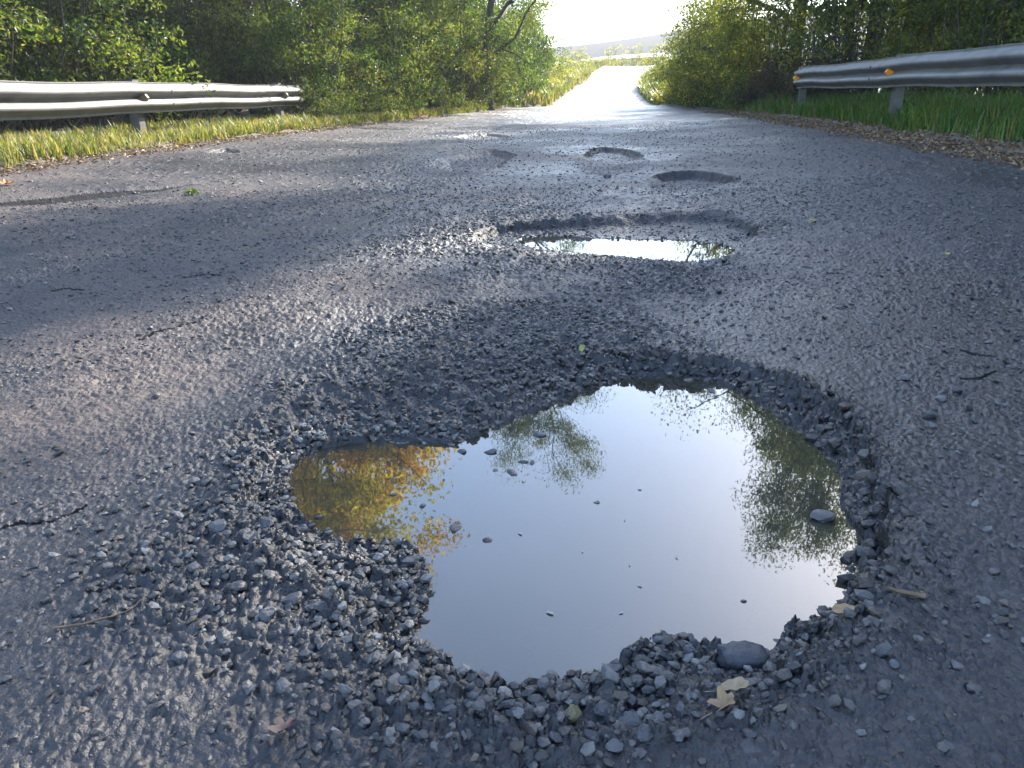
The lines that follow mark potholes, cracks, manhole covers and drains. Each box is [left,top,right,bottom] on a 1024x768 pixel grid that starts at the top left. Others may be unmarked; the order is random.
crack [0,181,220,207]
crack [959,349,998,380]
crack [138,321,196,341]
pothole [221,344,898,750]
pothole [646,170,742,193]
crack [0,504,88,530]
pothole [462,207,767,268]
pothole [574,146,650,176]
